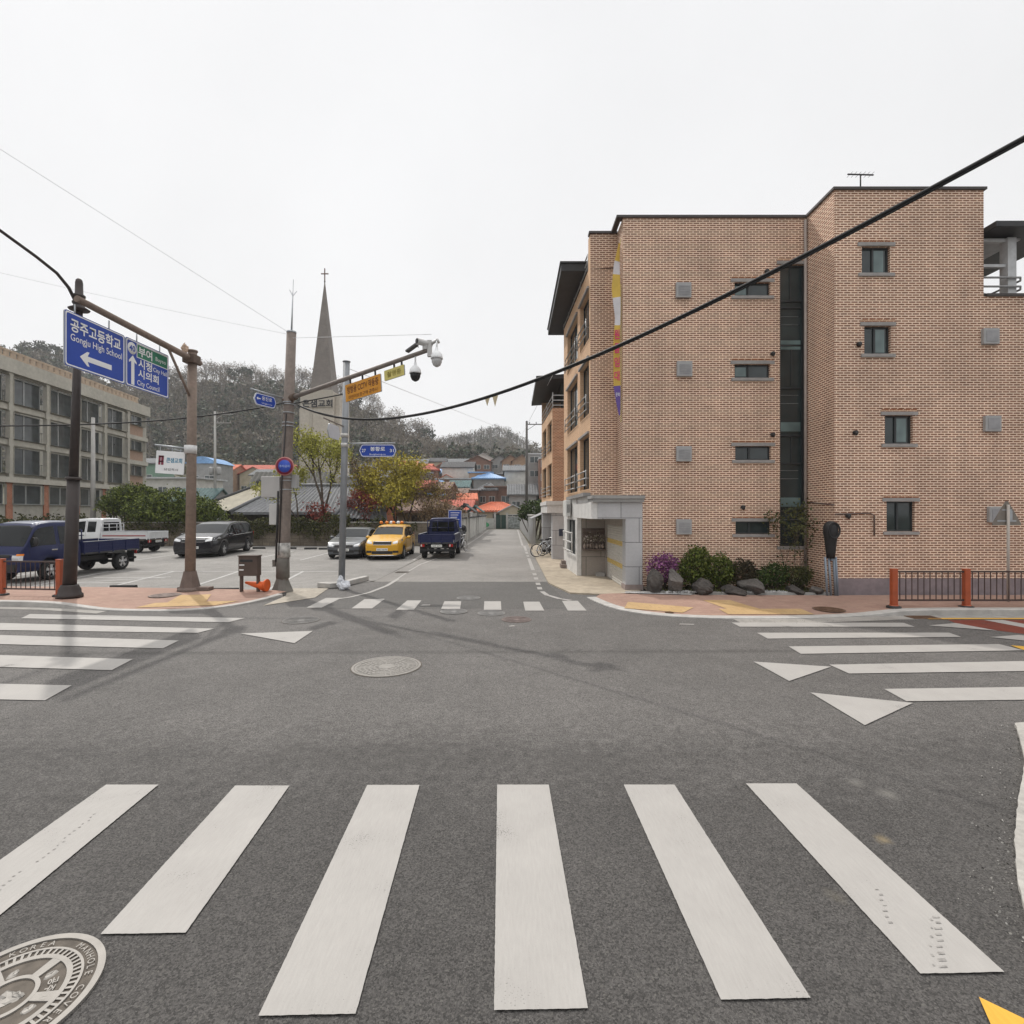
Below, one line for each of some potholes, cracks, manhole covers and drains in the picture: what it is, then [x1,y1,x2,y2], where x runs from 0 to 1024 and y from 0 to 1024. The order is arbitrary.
manhole cover [281,616,321,624]
manhole cover [350,656,422,677]
manhole cover [0,933,106,1024]
